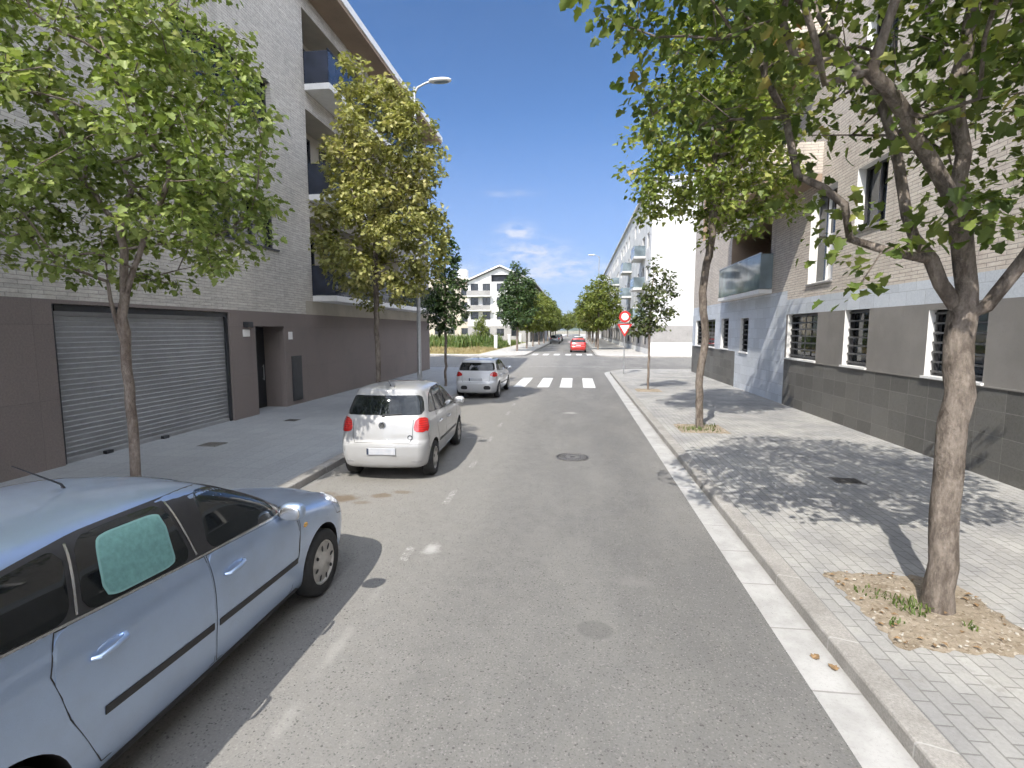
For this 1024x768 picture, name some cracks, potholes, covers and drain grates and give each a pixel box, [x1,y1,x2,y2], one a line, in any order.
manhole cover [556,453,589,461]
